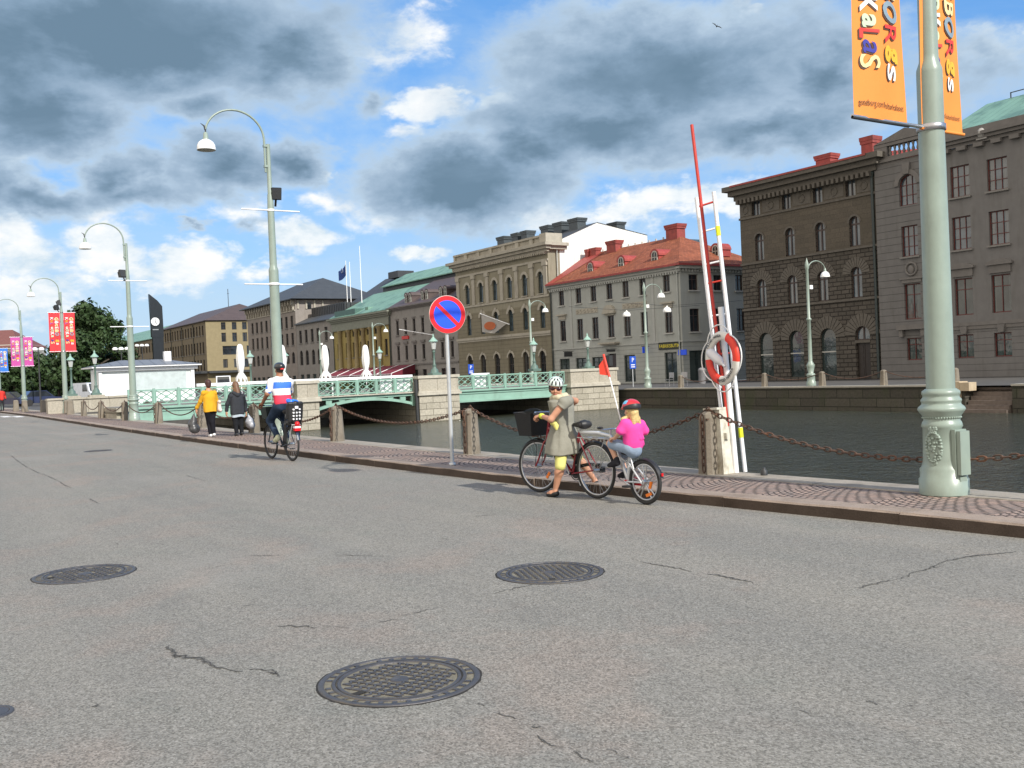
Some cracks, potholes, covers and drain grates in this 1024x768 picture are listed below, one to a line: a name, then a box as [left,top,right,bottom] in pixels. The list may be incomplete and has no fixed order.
manhole cover [30,564,137,585]
crack [637,560,752,582]
crack [855,551,1016,588]
crack [165,646,280,676]
crack [479,703,629,761]
manhole cover [316,655,482,708]
manhole cover [495,561,605,584]
utility cover [0,705,15,718]
